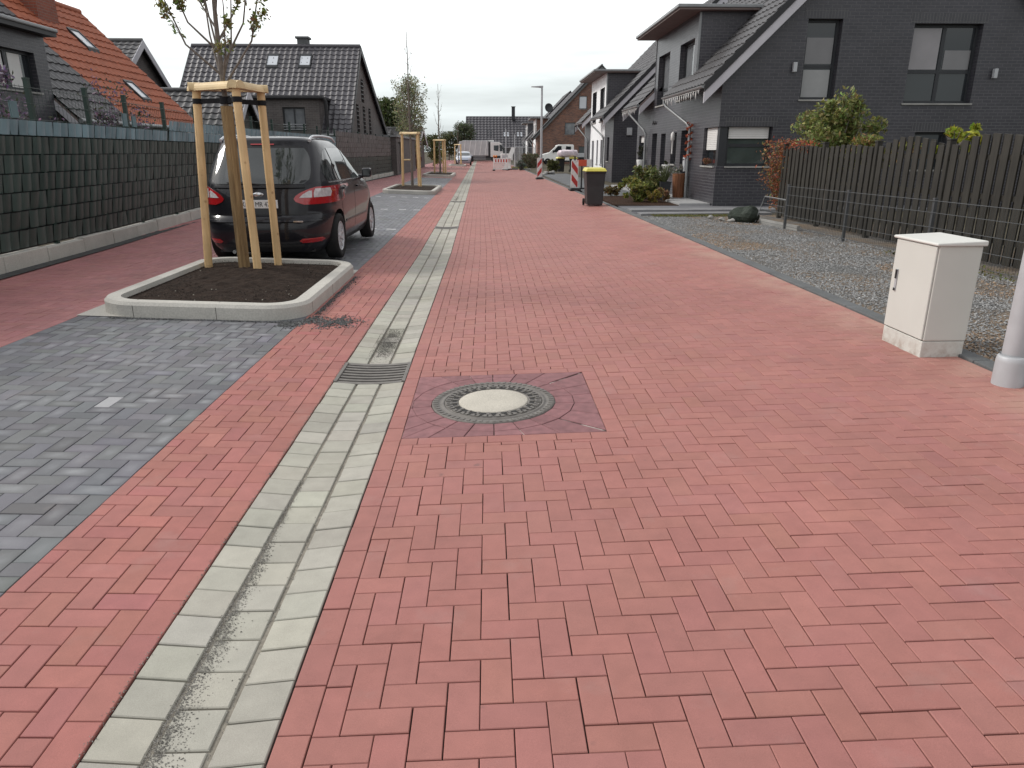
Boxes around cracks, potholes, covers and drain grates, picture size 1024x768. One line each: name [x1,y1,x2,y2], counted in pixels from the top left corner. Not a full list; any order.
drain grate [333,362,412,386]
manhole cover [402,372,607,440]
